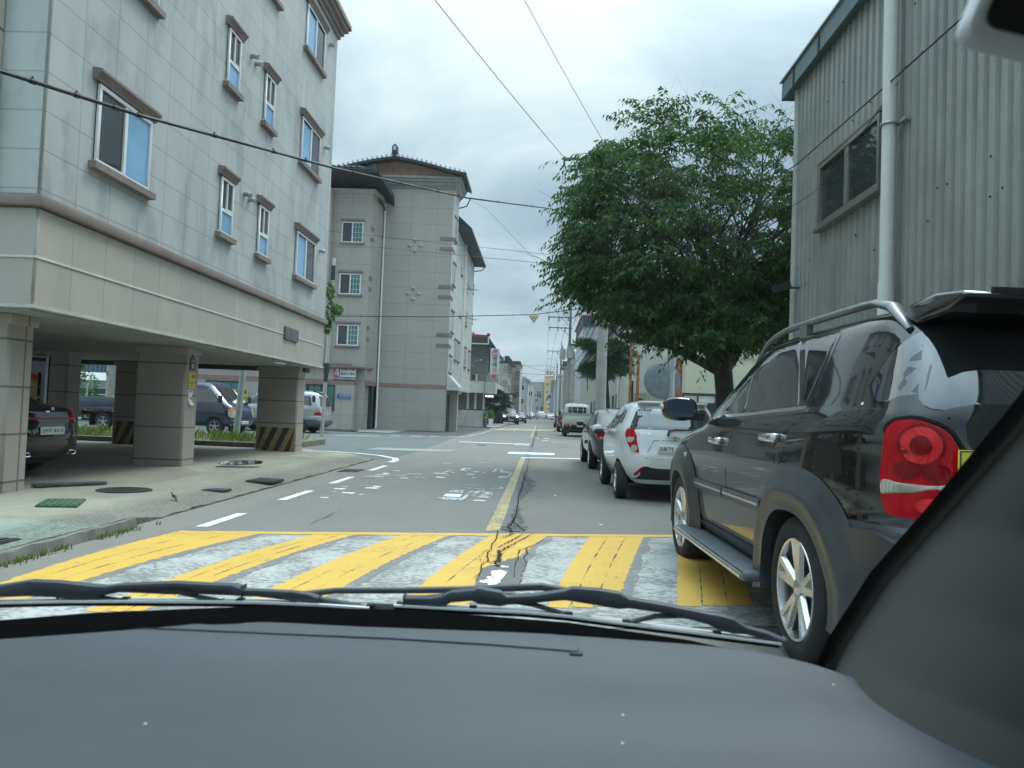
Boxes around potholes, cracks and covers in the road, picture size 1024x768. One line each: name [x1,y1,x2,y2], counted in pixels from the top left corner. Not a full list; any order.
crack [474,428,540,580]
